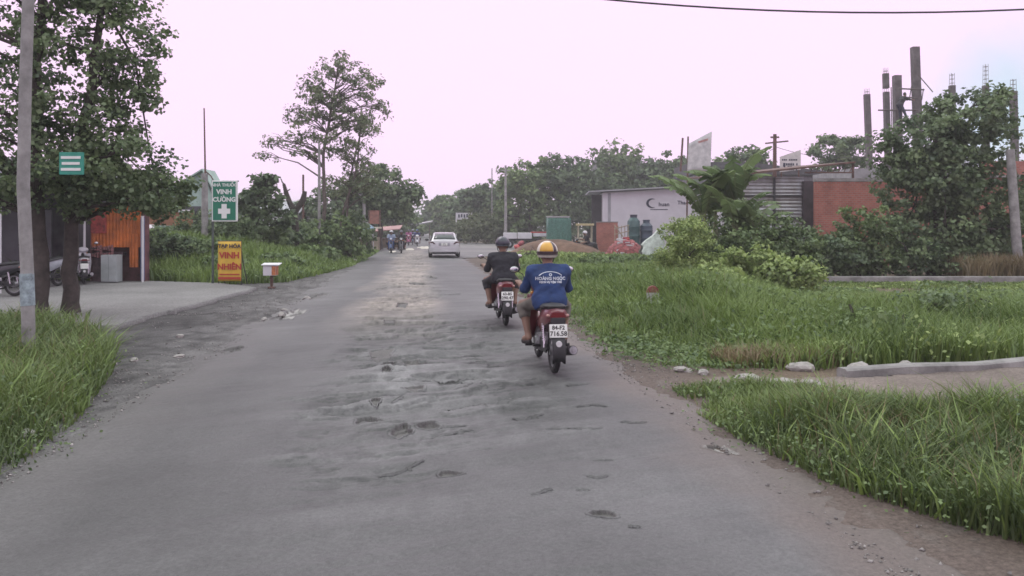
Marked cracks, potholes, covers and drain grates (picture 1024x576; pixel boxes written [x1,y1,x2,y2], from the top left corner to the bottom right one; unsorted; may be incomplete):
pothole [388,422,415,440]
pothole [353,416,385,425]
pothole [414,420,444,431]
pothole [436,469,467,478]
pothole [585,509,621,519]
